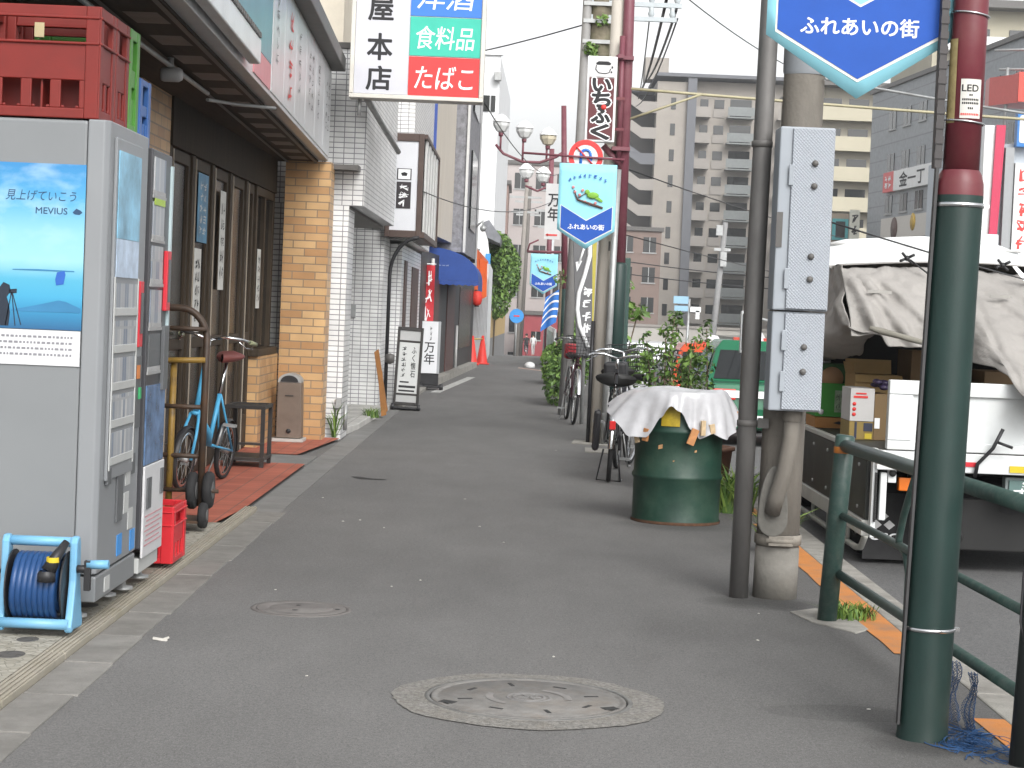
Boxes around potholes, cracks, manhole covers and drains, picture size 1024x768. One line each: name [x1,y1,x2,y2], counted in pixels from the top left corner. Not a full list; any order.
manhole cover [251,601,352,617]
manhole cover [391,673,664,730]
